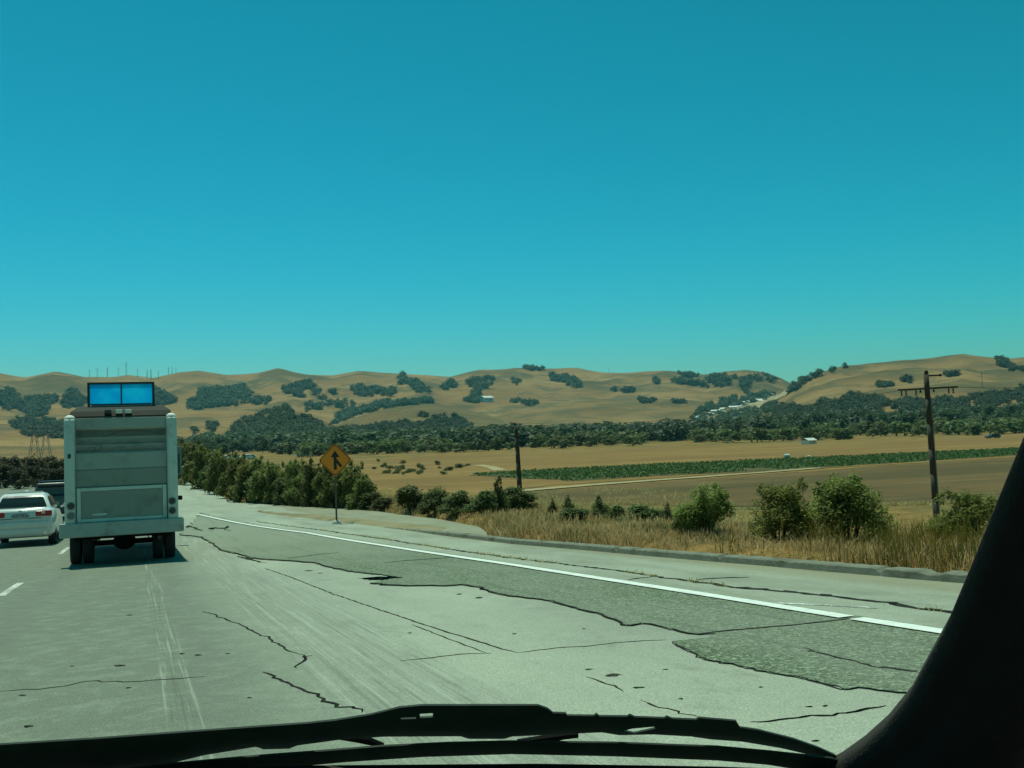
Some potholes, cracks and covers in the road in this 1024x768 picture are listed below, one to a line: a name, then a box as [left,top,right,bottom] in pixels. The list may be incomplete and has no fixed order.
crack [0,676,205,692]
crack [180,526,919,723]
